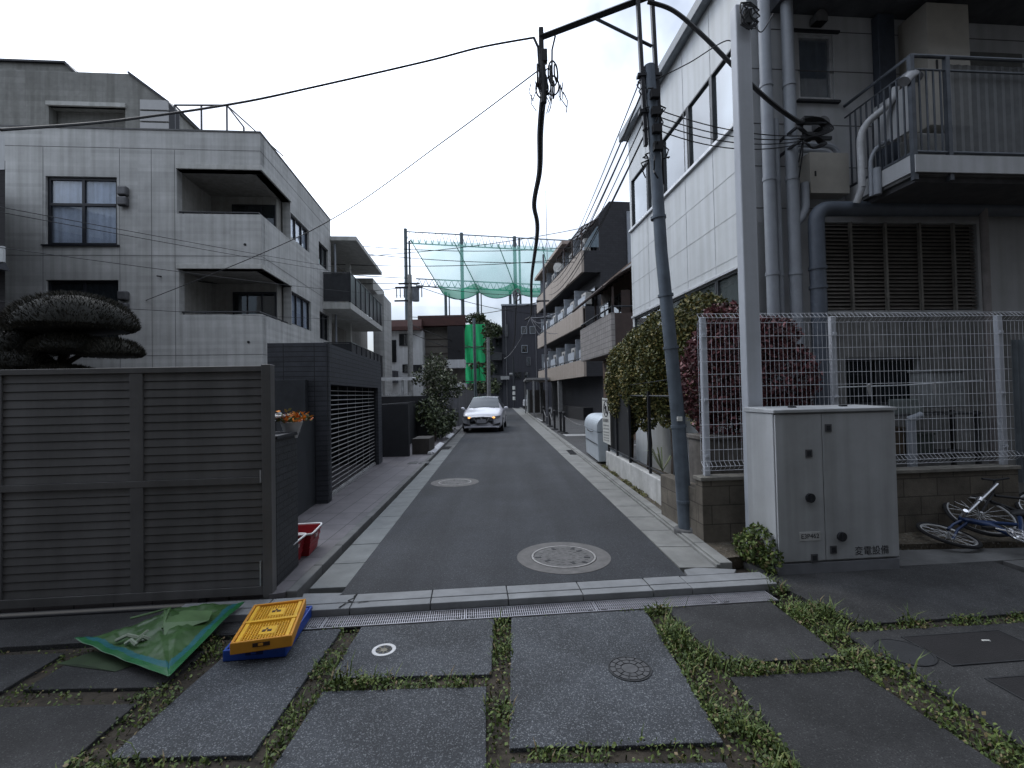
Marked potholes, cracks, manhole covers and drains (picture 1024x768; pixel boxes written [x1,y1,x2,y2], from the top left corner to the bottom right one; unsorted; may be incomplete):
drain grate [592,594,721,611]
drain grate [466,601,597,619]
utility cover [608,656,652,682]
manhole cover [431,478,479,487]
drain grate [321,609,465,628]
utility cover [901,630,1024,667]
manhole cover [517,542,611,574]
